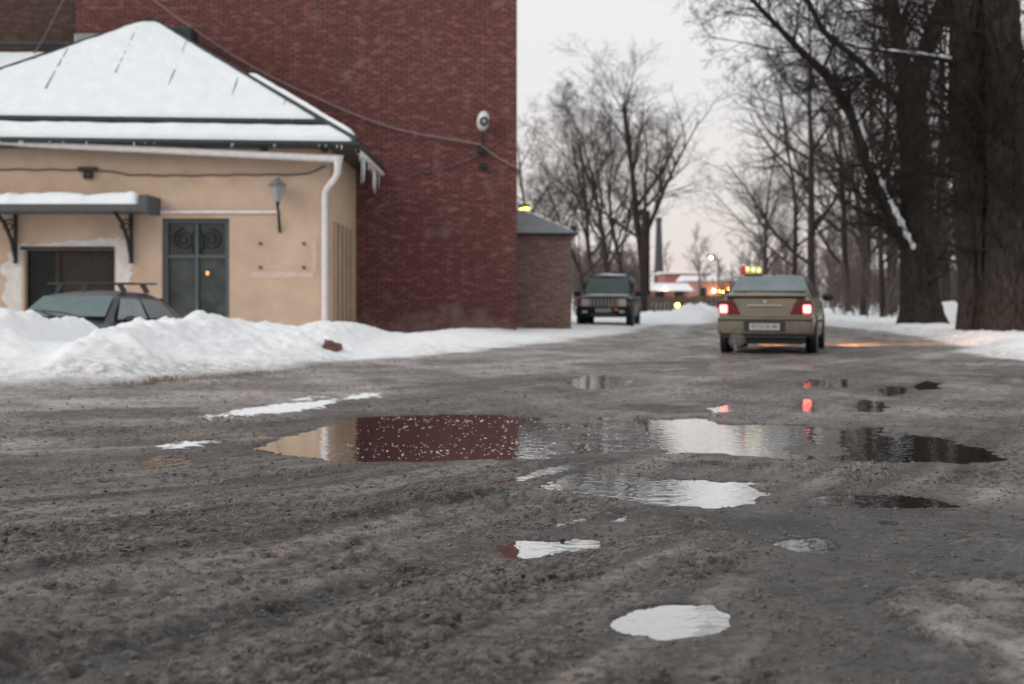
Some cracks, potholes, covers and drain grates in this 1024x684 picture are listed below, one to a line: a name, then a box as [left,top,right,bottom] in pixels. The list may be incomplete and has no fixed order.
pothole [845,399,891,412]
pothole [250,412,1011,464]
pothole [600,602,735,640]
pothole [564,374,635,389]
pothole [492,536,610,559]
pothole [806,492,965,509]
pothole [910,380,944,390]
pothole [534,471,773,508]
pothole [770,536,845,553]
